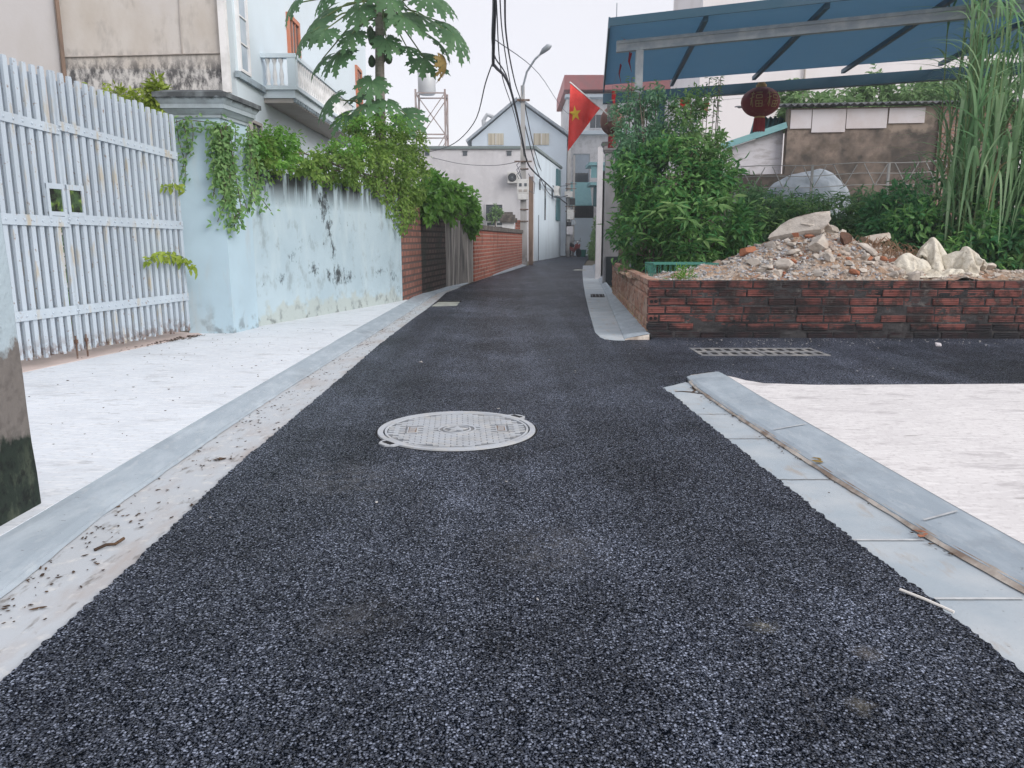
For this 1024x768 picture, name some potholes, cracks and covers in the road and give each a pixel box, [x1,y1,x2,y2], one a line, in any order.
drain grate [689,348,765,356]
drain grate [751,348,831,356]
manhole cover [375,411,538,452]
